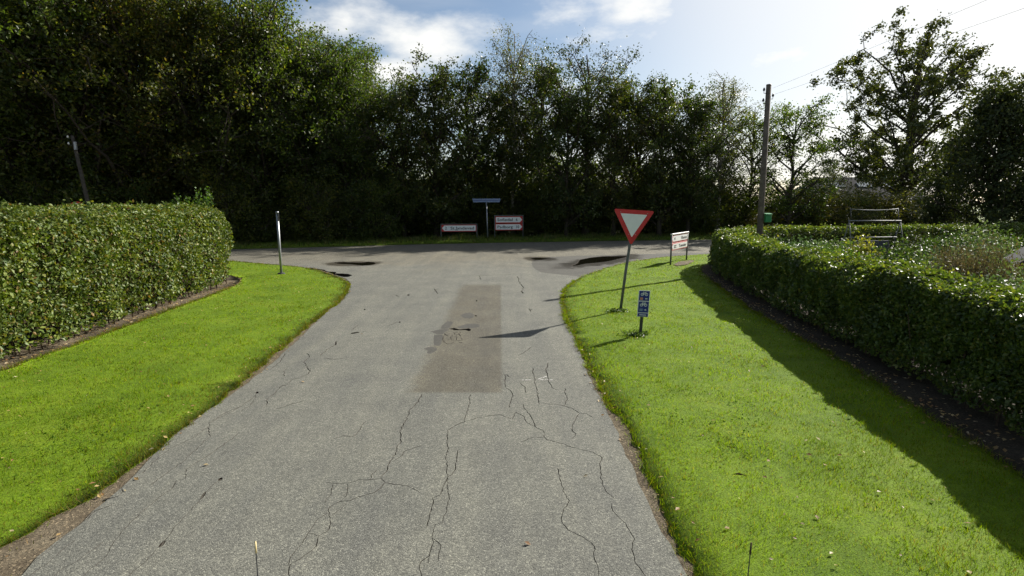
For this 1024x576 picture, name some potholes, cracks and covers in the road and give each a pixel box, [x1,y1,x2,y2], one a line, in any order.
crack [419,395,511,576]
crack [288,394,422,576]
crack [30,324,359,576]
crack [504,347,645,575]
pothole [572,256,627,266]
